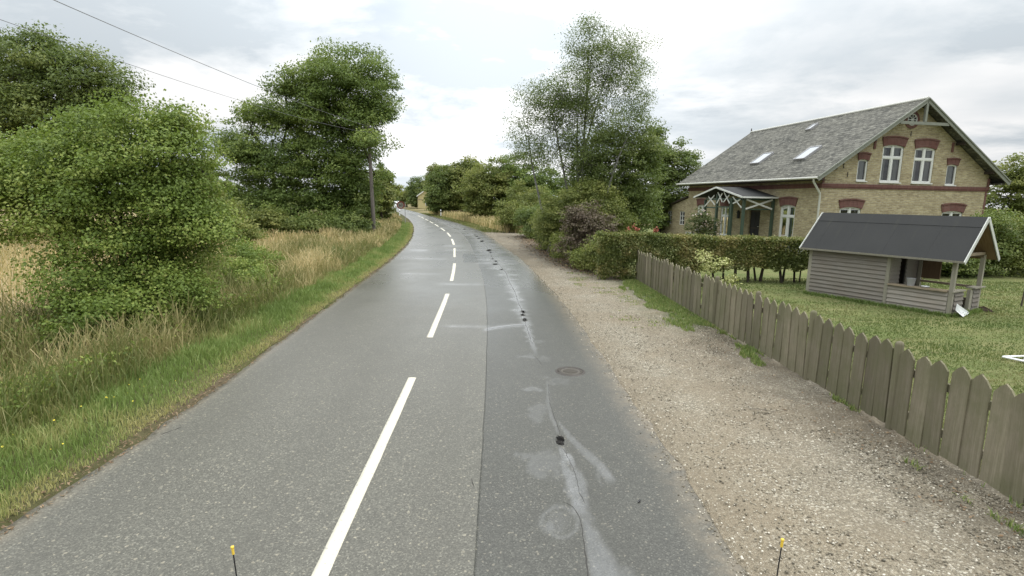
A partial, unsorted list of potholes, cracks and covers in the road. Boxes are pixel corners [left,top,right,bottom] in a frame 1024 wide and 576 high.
manhole cover [555,366,585,376]
crack [548,385,588,576]
pothole [553,435,567,447]
